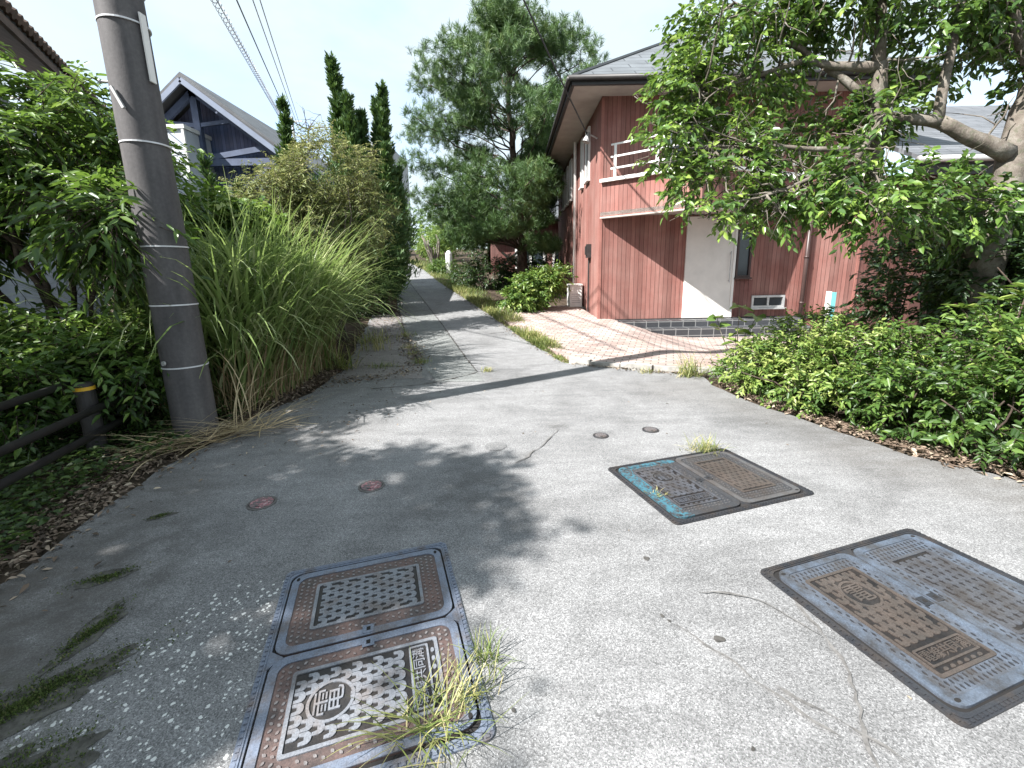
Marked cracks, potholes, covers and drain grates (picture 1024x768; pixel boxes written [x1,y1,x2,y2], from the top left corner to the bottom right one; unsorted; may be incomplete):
manhole cover [608,448,814,525]
utility cover [358,480,385,493]
manhole cover [760,528,1024,729]
crack [670,591,913,768]
manhole cover [229,542,495,768]
utility cover [246,496,277,511]
